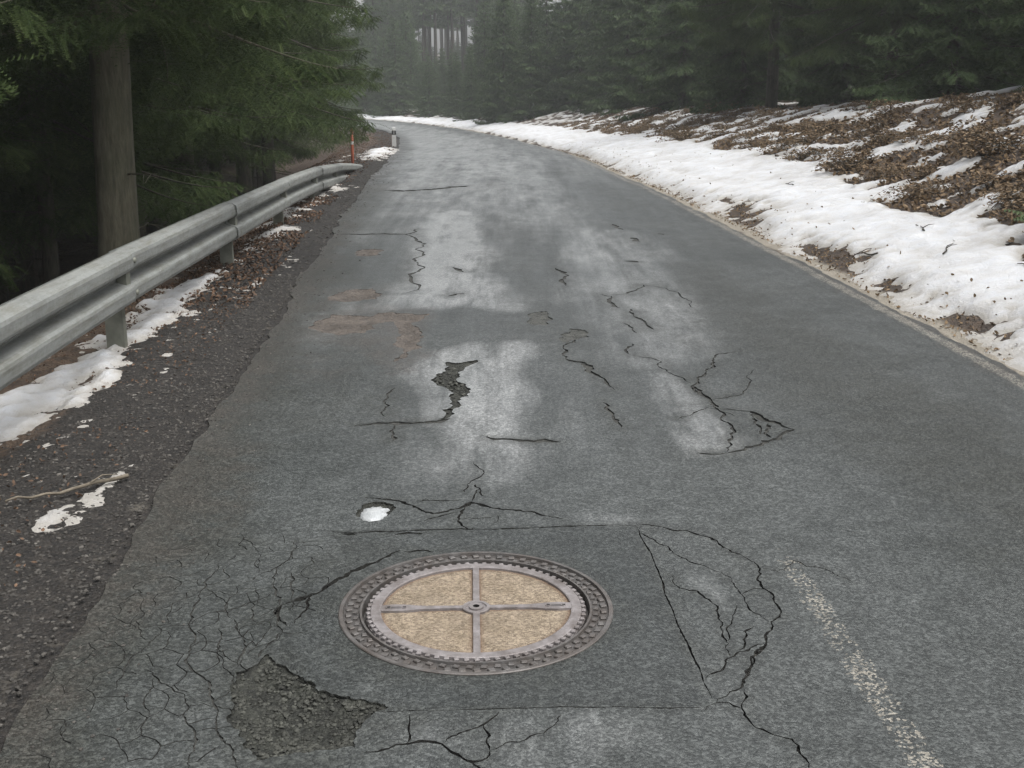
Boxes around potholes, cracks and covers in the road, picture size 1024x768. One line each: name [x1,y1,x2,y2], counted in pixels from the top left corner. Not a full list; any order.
crack [355,388,449,441]
crack [369,712,562,768]
pothole [226,654,389,761]
pothole [356,501,396,520]
crack [561,285,795,455]
crack [366,462,562,530]
manhole cover [338,551,613,676]
crack [625,521,853,768]
crack [341,228,426,292]
crack [27,532,432,768]
